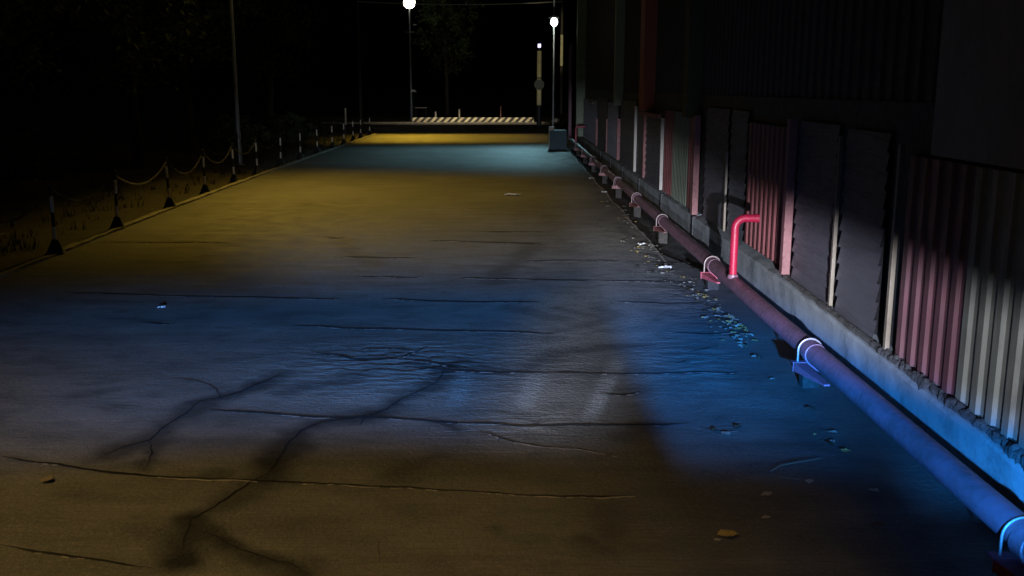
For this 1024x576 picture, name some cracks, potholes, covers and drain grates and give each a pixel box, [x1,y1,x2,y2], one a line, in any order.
crack [3,325,734,573]
